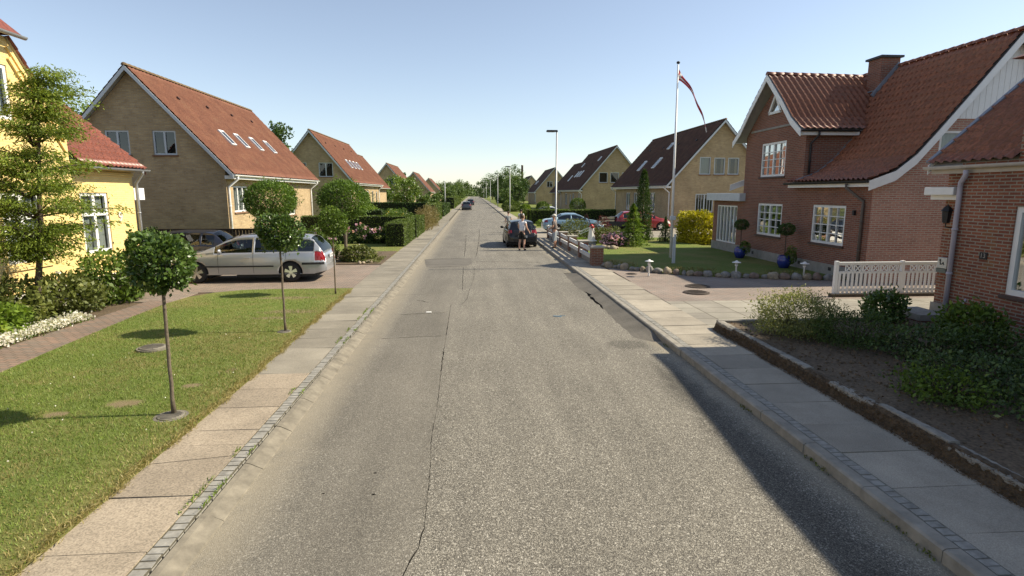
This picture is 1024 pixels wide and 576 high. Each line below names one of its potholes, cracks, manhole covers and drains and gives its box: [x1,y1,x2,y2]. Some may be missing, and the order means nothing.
manhole cover [136,343,166,353]
crack [402,219,493,576]
